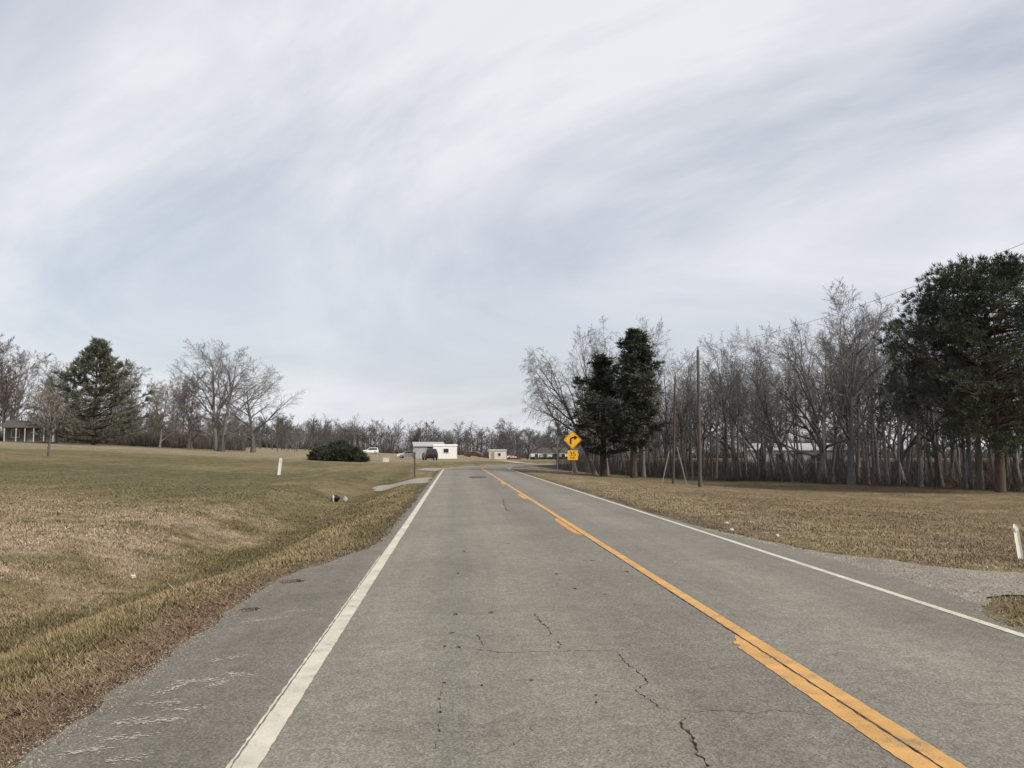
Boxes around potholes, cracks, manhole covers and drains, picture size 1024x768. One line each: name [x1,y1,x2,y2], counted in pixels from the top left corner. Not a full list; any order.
crack [476,613,827,768]
